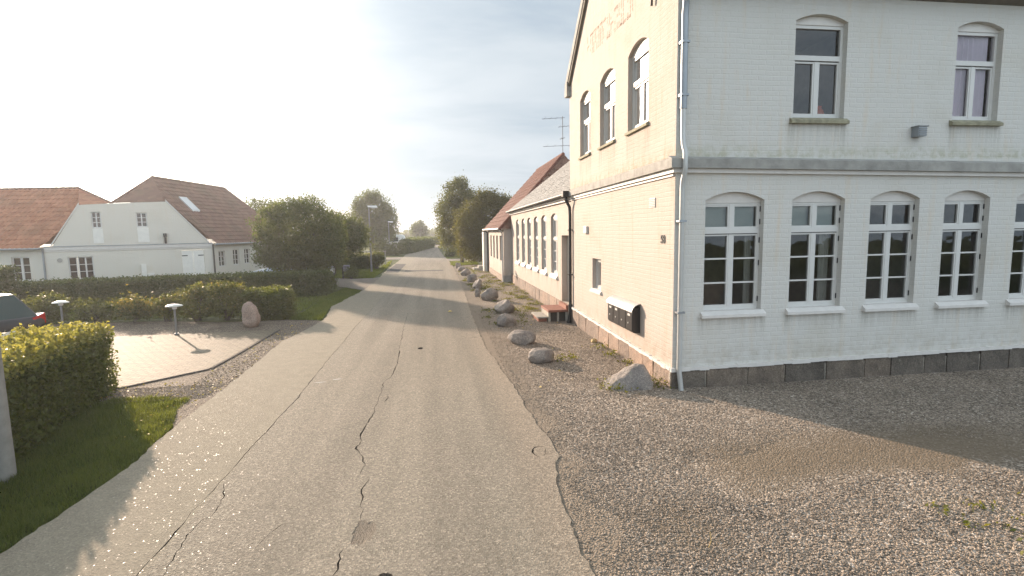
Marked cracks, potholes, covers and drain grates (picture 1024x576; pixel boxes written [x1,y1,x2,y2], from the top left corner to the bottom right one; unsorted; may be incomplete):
crack [333,313,408,575]
pothole [351,519,376,546]
crack [163,484,225,576]
